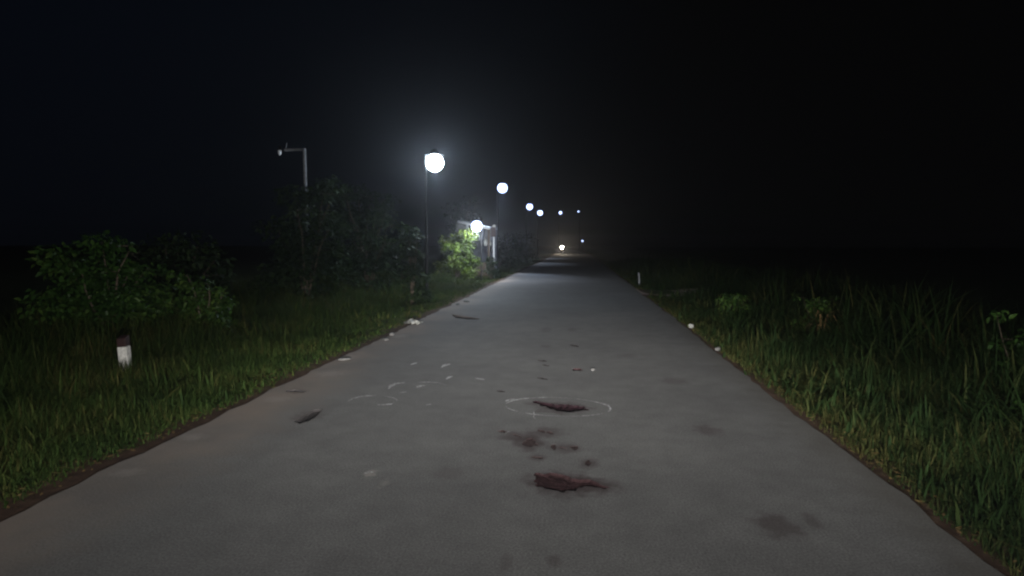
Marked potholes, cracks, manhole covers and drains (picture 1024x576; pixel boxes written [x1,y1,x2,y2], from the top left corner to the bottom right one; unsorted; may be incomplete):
pothole [532,401,589,412]
pothole [294,409,322,424]
pothole [534,473,609,493]
